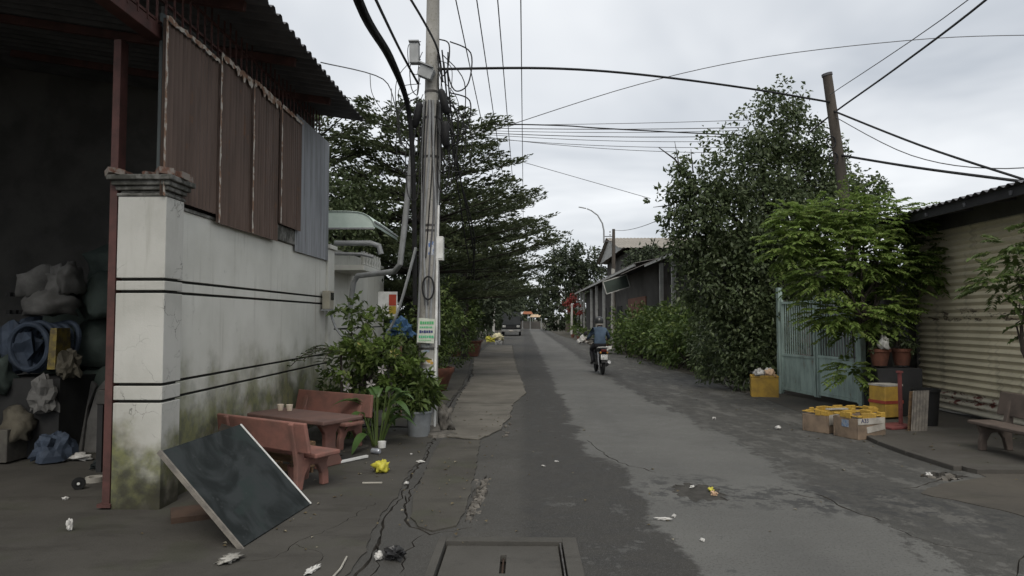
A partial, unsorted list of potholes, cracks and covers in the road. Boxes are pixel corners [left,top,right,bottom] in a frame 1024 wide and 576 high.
pothole [672,483,728,502]
manhole cover [424,537,585,576]
crack [400,478,471,573]
pothole [465,475,490,523]
